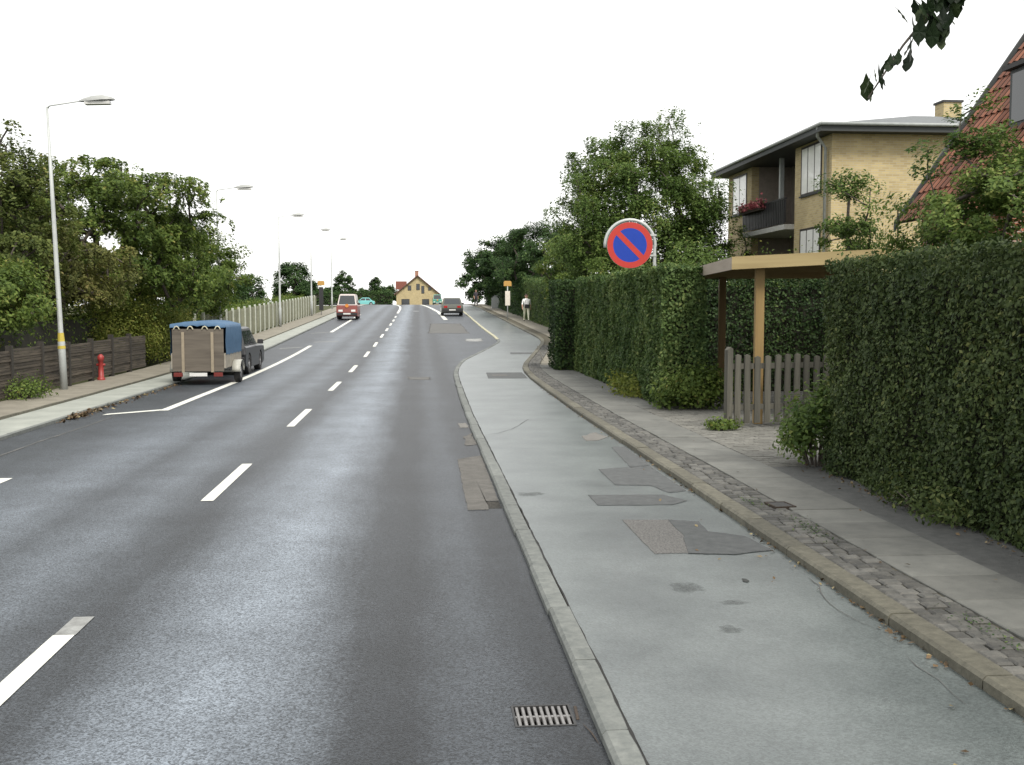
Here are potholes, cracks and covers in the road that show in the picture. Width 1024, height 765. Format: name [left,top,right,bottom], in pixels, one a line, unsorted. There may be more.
drain grate [511,704,577,728]
utility cover [764,501,797,510]
